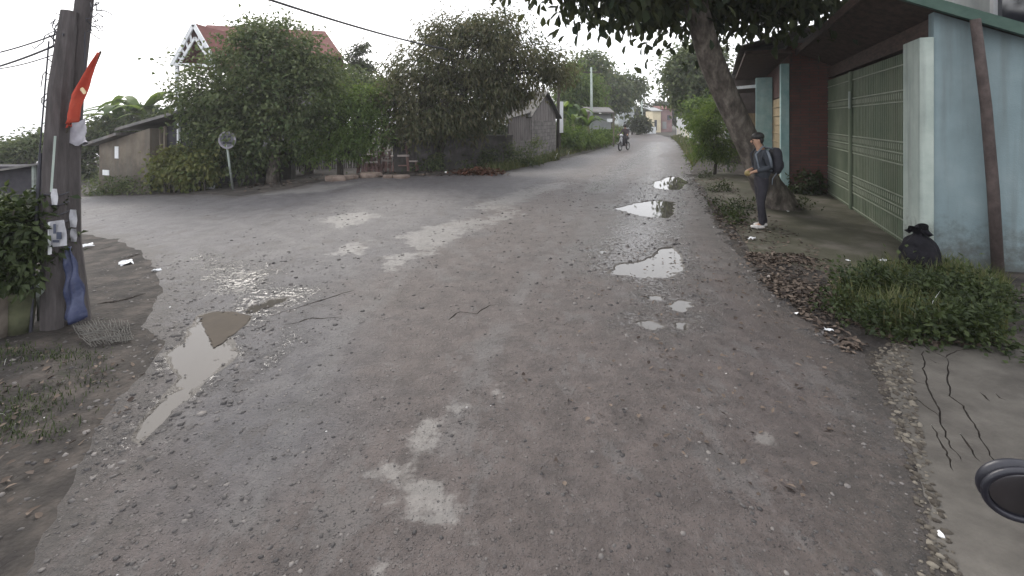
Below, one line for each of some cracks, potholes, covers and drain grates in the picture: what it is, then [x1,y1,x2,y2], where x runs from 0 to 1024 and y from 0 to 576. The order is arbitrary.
crack [908,344,1005,470]
crack [278,290,353,325]
pothole [606,246,685,278]
pothole [131,311,253,445]
